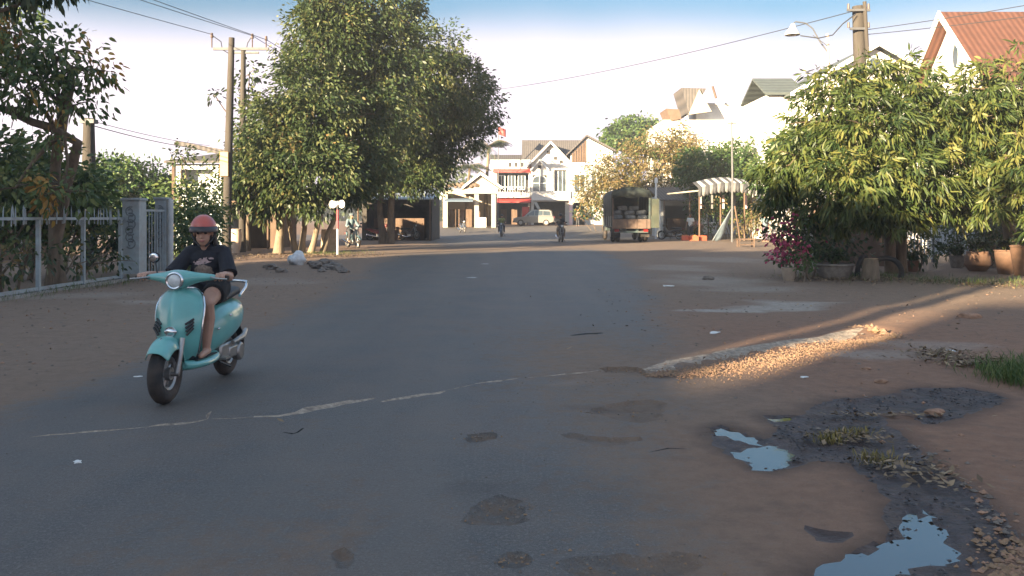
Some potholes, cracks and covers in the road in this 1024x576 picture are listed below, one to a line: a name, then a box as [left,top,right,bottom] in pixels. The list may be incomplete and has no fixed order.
pothole [578,399,668,423]
pothole [559,551,704,576]
pothole [804,525,854,543]
pothole [460,494,530,526]
pothole [331,547,355,569]
pothole [560,432,643,446]
pothole [465,432,498,443]
pothole [496,551,533,569]
